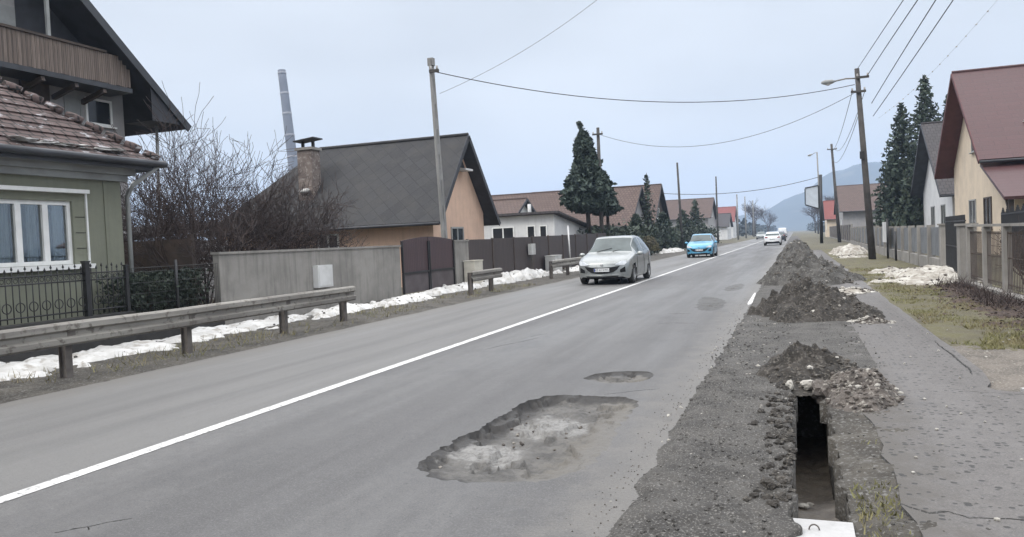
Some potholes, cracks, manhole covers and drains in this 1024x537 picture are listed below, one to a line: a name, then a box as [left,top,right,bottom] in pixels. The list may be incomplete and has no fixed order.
crack [55,518,133,533]
crack [902,504,1023,520]
pothole [416,395,639,483]
pothole [583,371,654,384]
crack [934,341,1024,395]
